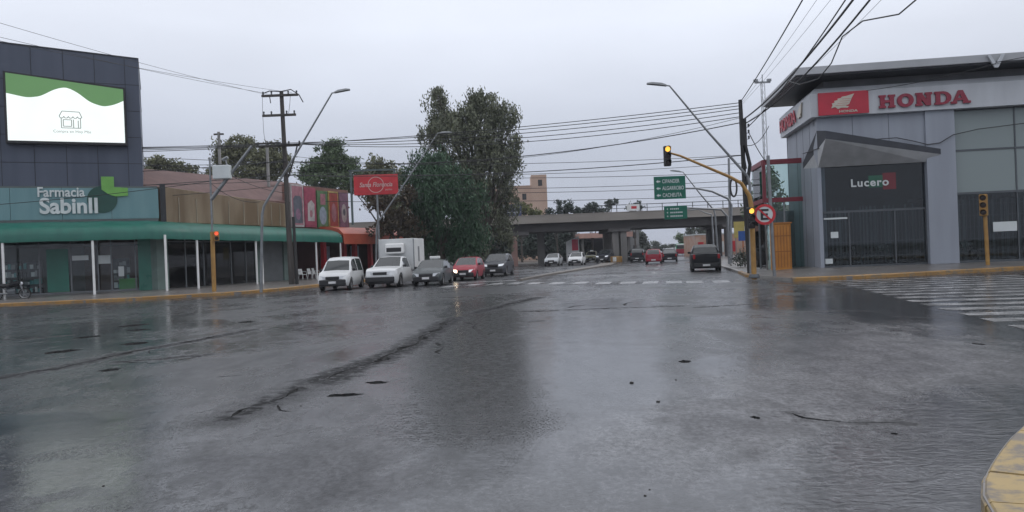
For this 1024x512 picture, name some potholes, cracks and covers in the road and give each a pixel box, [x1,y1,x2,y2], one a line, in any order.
crack [792,413,892,423]
crack [230,388,298,418]
crack [12,330,248,376]
